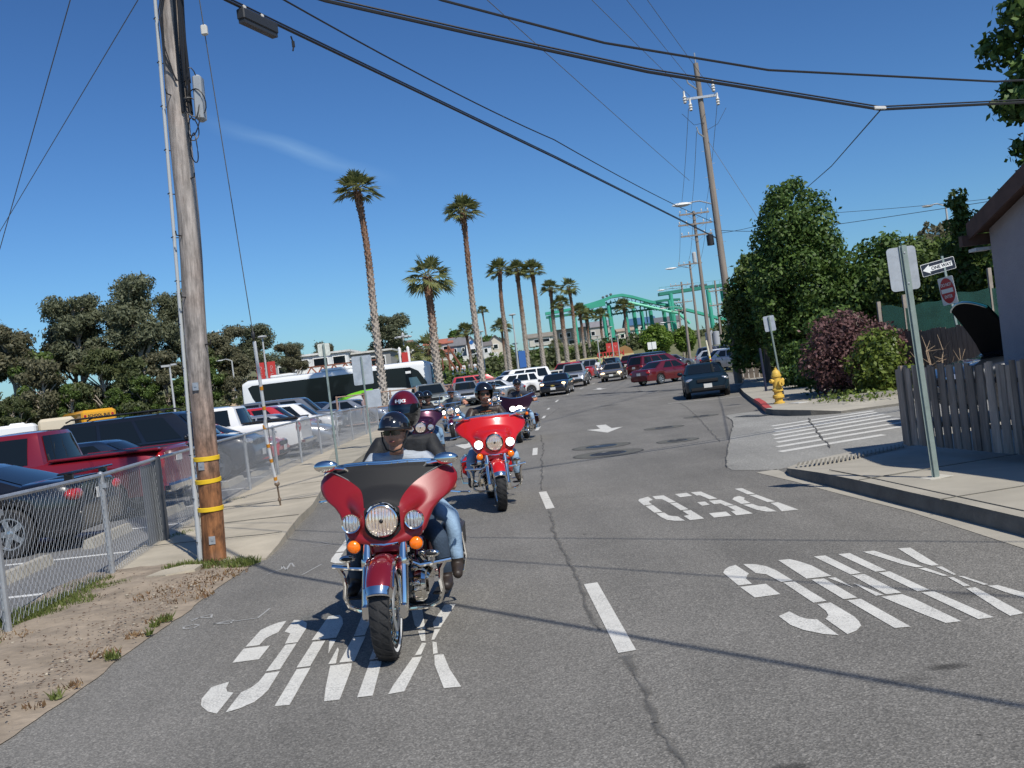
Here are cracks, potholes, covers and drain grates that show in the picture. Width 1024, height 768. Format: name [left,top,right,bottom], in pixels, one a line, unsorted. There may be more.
manhole cover [573,448,644,459]
manhole cover [572,442,630,450]
